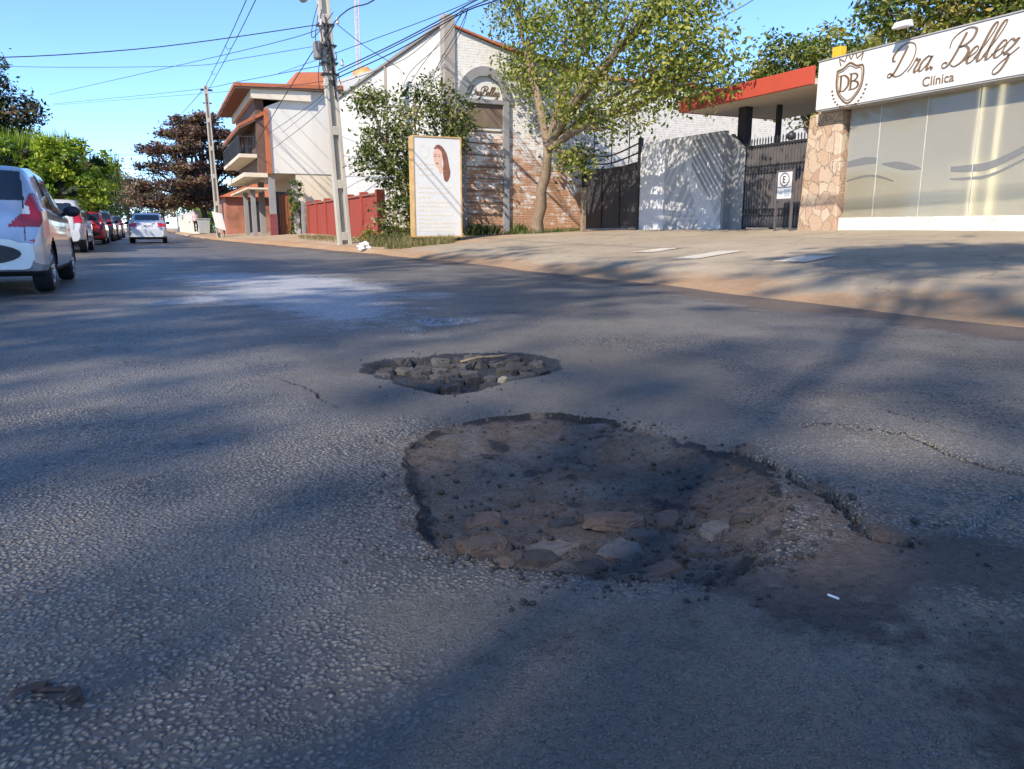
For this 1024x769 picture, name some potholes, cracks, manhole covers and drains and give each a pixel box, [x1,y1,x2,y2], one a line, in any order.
crack [715,408,1024,549]
crack [279,379,340,408]
pothole [402,413,791,587]
pothole [360,352,565,395]
